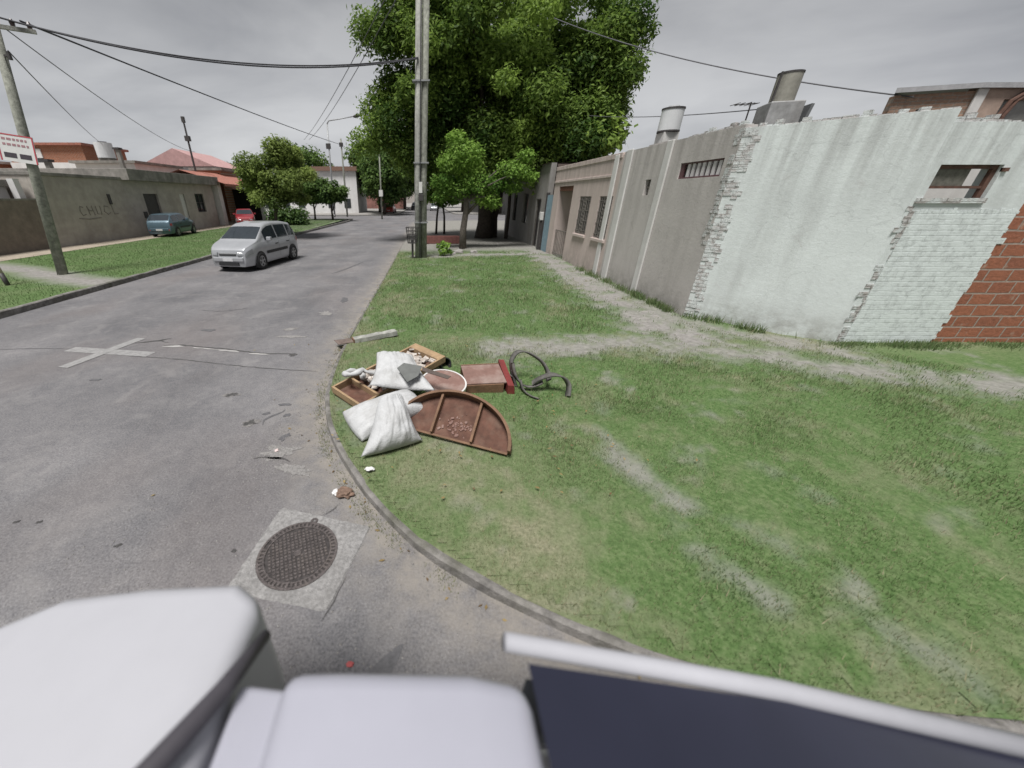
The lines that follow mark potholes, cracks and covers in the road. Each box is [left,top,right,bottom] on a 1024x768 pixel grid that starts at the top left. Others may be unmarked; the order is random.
manhole cover [255,518,338,591]
